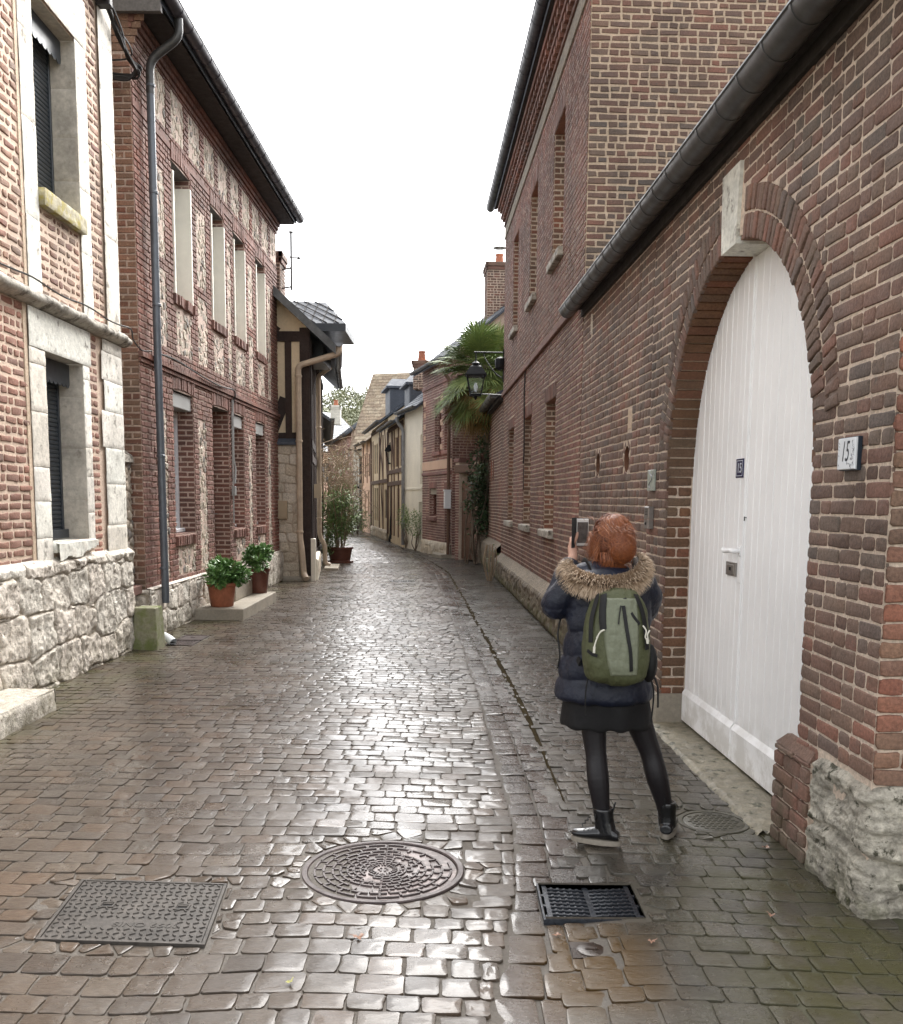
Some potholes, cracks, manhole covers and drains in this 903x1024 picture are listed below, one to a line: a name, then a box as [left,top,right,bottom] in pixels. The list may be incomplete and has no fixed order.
drain grate [536,884,645,925]
utility cover [569,942,603,959]
manhole cover [678,810,750,835]
manhole cover [301,840,464,905]
manhole cover [35,879,227,948]
